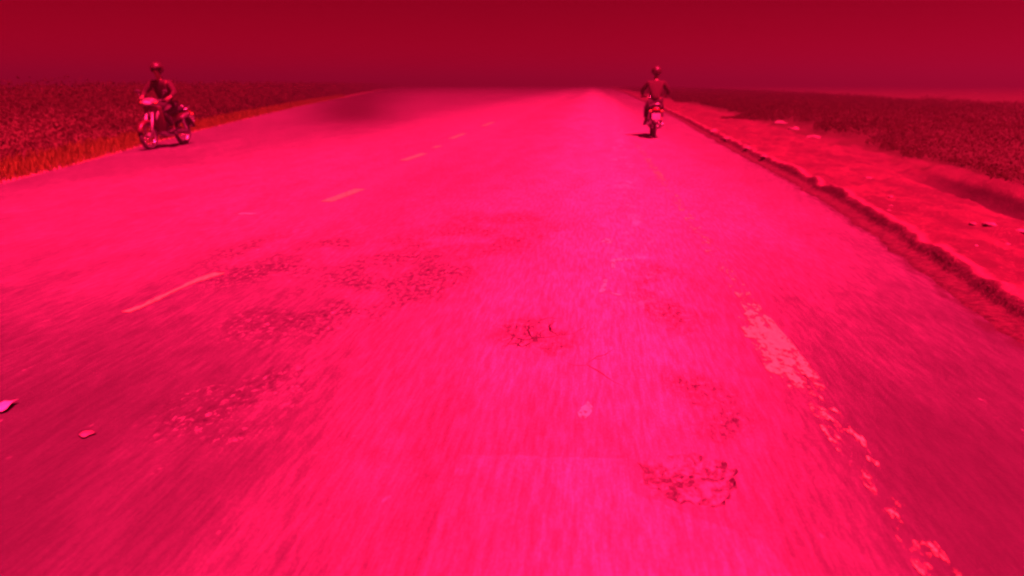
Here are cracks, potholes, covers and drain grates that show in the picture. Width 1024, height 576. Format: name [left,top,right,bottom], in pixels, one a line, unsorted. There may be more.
pothole [637,452,739,508]
crack [563,351,624,387]
